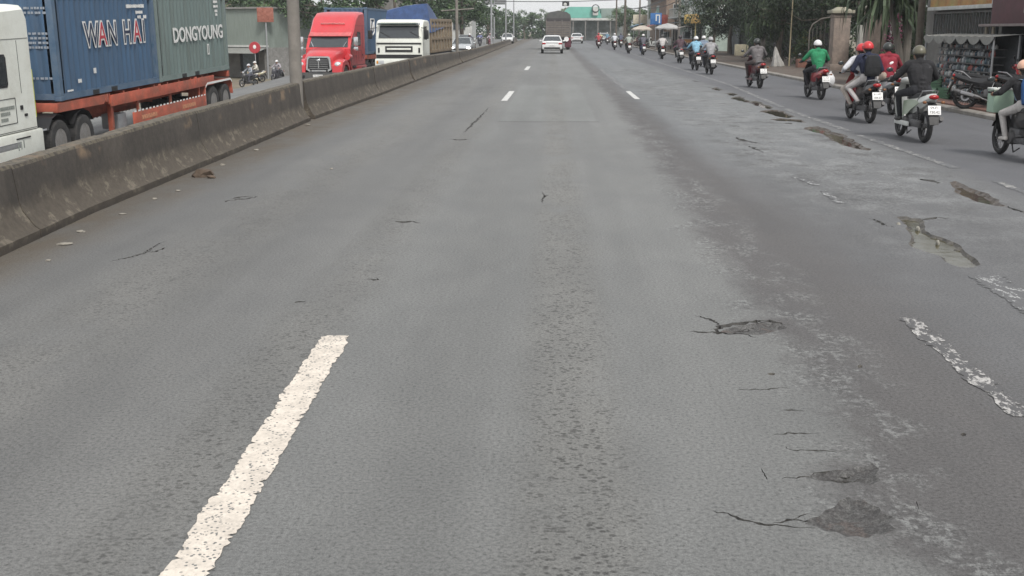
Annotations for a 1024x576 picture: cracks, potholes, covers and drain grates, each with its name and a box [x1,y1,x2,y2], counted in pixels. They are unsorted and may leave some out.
crack [708,509,811,528]
pothole [805,497,896,538]
crack [774,432,834,452]
pothole [760,110,795,118]
pothole [721,322,786,335]
pothole [896,216,980,268]
crack [113,242,164,261]
pothole [804,126,871,151]
pothole [808,464,880,485]
pothole [950,181,1005,206]
